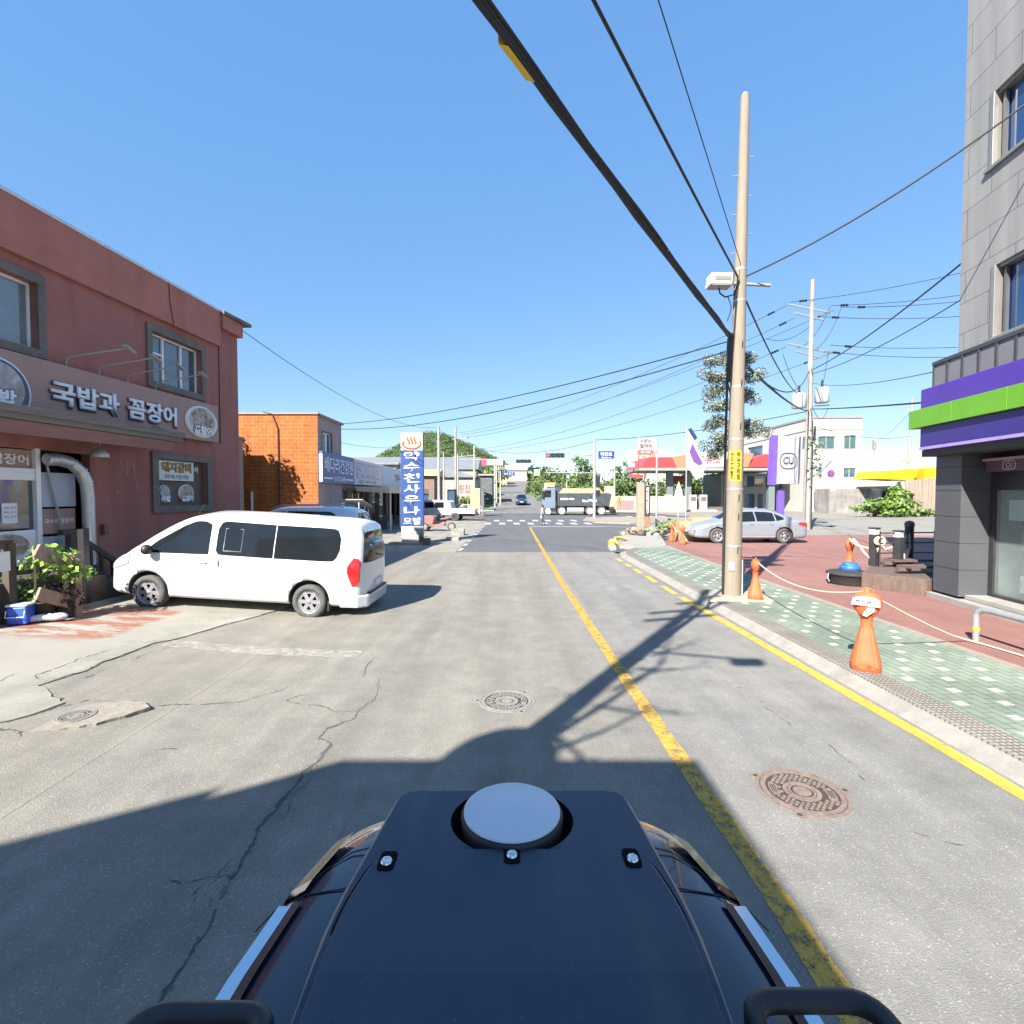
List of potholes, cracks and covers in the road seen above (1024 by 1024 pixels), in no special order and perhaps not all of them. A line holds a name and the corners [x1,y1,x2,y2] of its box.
manhole cover [749,768,853,819]
crack [158,658,379,1003]
crack [0,606,291,736]
manhole cover [474,690,535,713]
